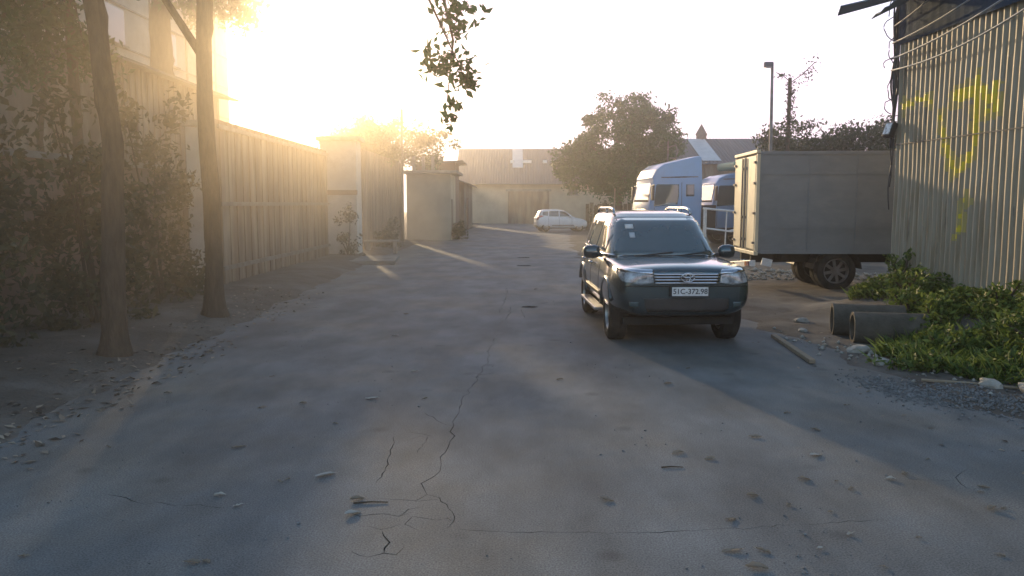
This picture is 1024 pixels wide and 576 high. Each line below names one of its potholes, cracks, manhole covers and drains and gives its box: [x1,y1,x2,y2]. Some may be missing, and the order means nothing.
crack [351,320,503,557]
crack [462,519,884,533]
